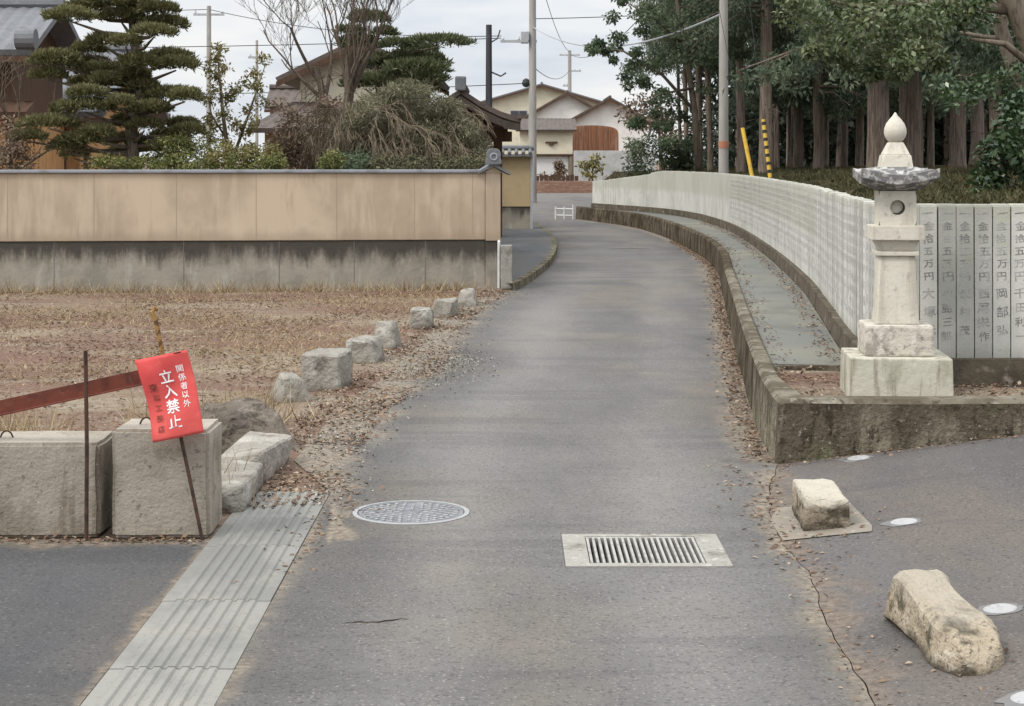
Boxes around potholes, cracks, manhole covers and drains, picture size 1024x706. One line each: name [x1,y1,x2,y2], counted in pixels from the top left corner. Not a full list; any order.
drain grate [561,534,733,567]
crack [768,495,876,706]
manhole cover [352,500,470,525]
